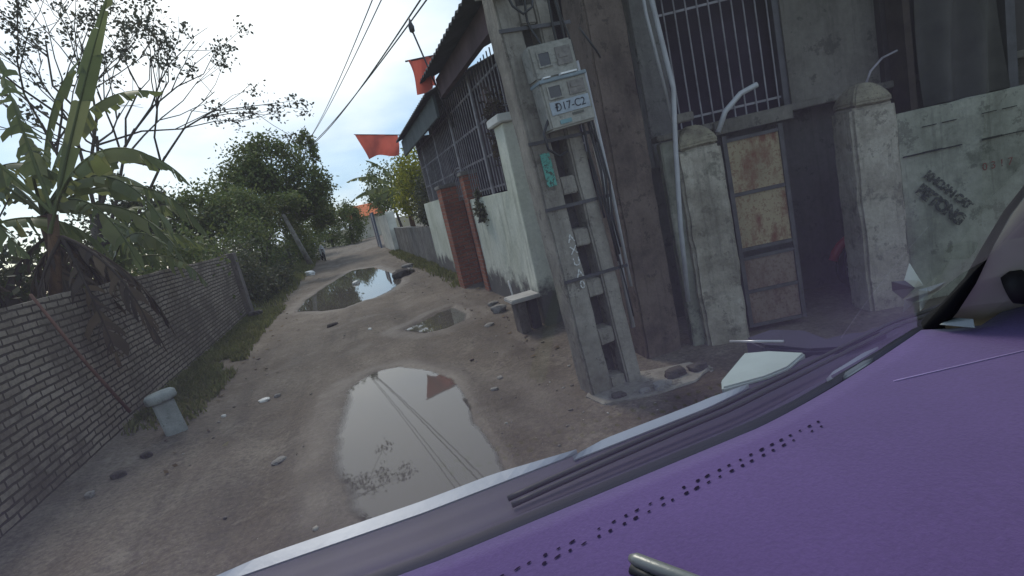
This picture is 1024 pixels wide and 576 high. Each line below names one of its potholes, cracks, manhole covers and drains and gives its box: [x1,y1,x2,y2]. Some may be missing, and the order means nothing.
pothole [286,265,410,314]
pothole [387,301,482,337]
pothole [290,359,535,542]
